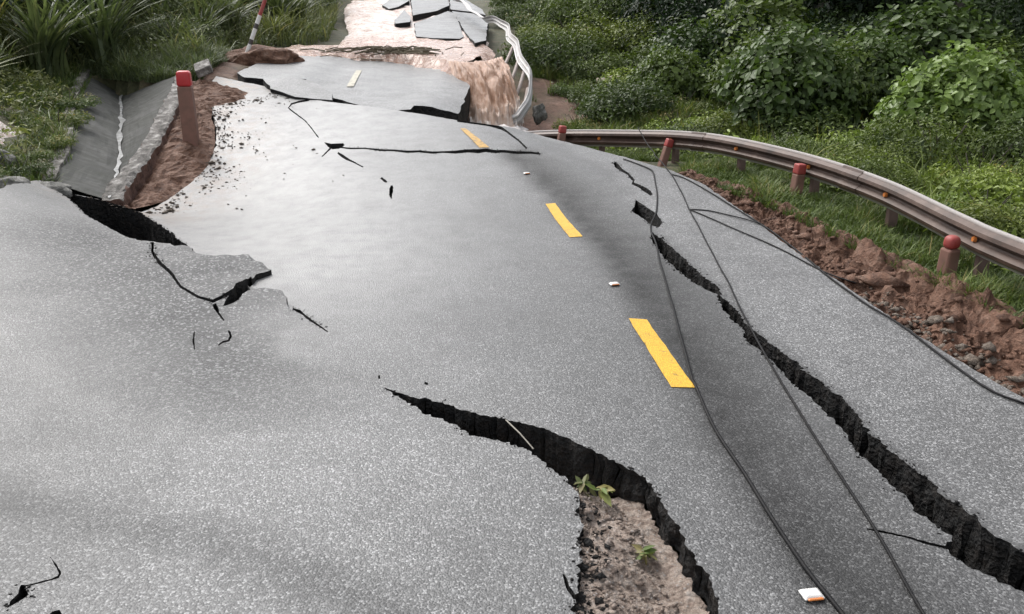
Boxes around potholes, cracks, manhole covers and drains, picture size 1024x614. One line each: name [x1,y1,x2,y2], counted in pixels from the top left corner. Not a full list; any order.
crack [7,557,61,608]
crack [292,308,328,332]
crack [385,388,719,614]
crack [650,232,1024,592]
crack [614,162,653,196]
crack [43,181,252,350]
crack [288,100,540,199]
